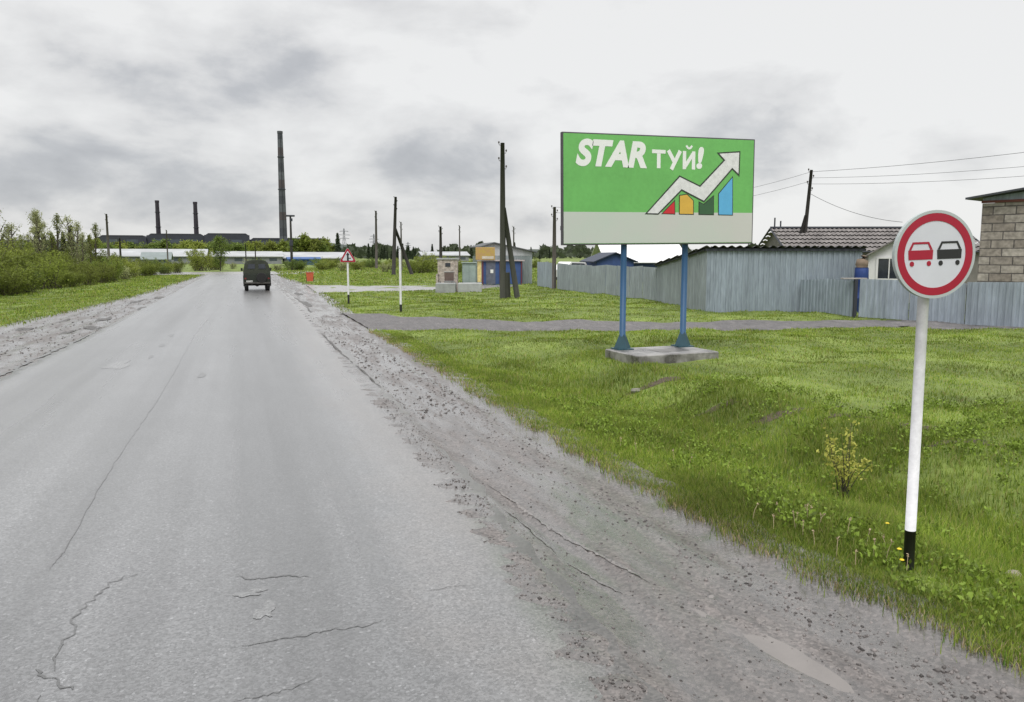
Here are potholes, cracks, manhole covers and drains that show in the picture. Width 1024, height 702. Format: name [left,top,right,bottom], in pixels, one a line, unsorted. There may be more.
crack [231,619,387,648]
crack [233,678,314,702]
crack [35,573,138,702]
